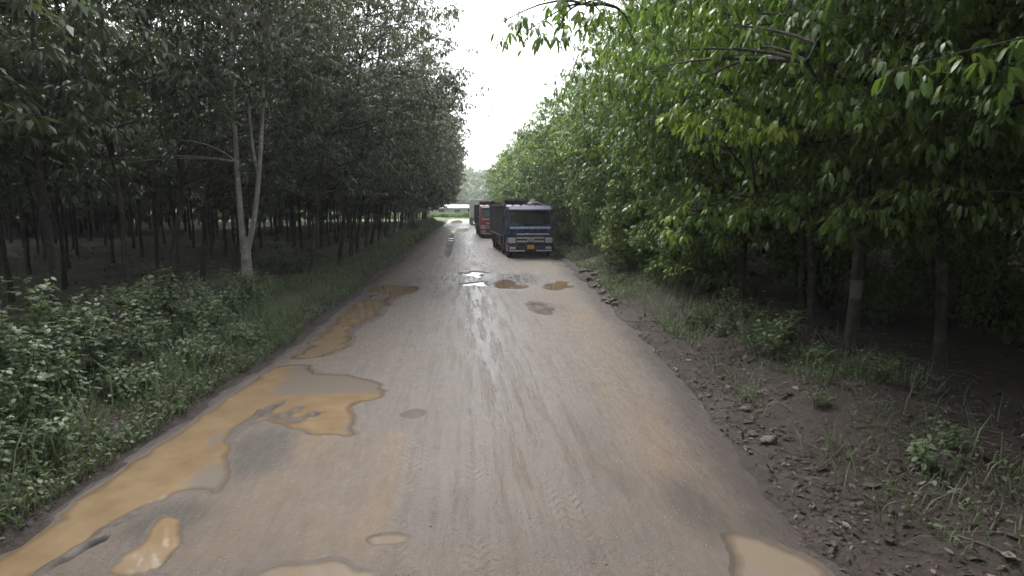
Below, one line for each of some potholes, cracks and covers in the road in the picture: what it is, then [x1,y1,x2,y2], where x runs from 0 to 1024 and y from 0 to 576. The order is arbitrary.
pothole [542,281,576,291]
pothole [0,364,388,576]
pothole [399,409,427,419]
pothole [493,279,530,289]
pothole [280,285,421,360]
pothole [525,301,560,315]
pothole [720,530,835,576]
pothole [365,531,412,546]
